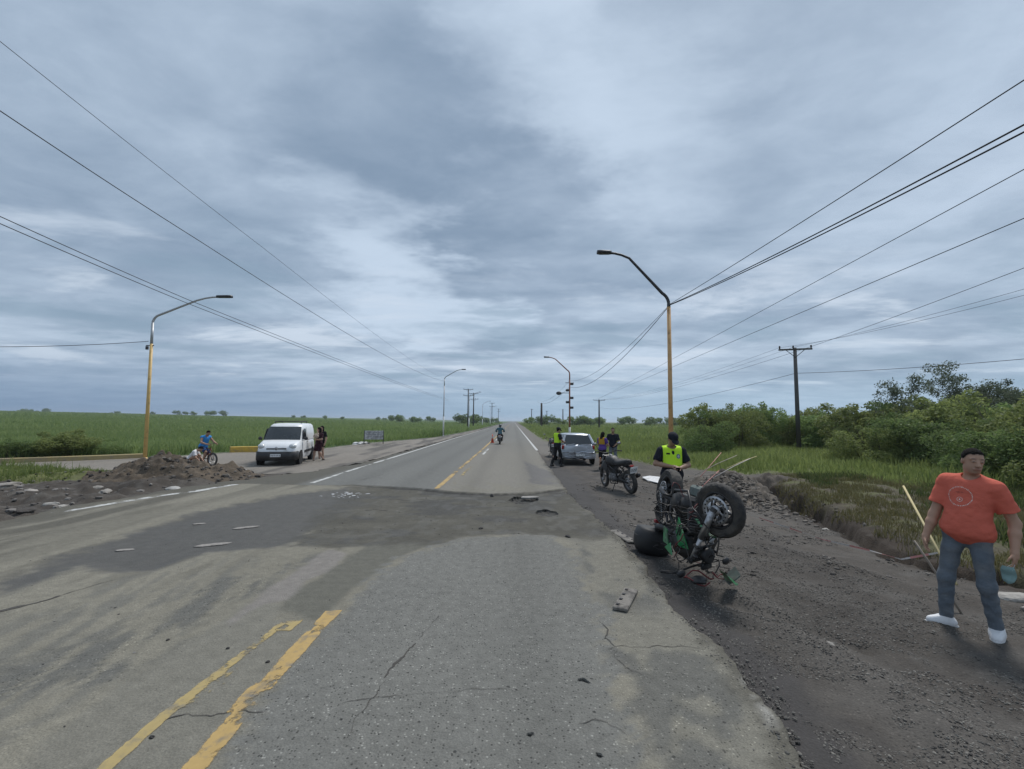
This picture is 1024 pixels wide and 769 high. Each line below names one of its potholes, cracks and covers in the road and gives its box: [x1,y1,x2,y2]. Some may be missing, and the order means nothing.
crack [0,579,116,612]
pothole [506,496,543,505]
pothole [532,509,563,518]
crack [168,709,261,719]
crack [599,621,695,675]
crack [342,615,513,732]
